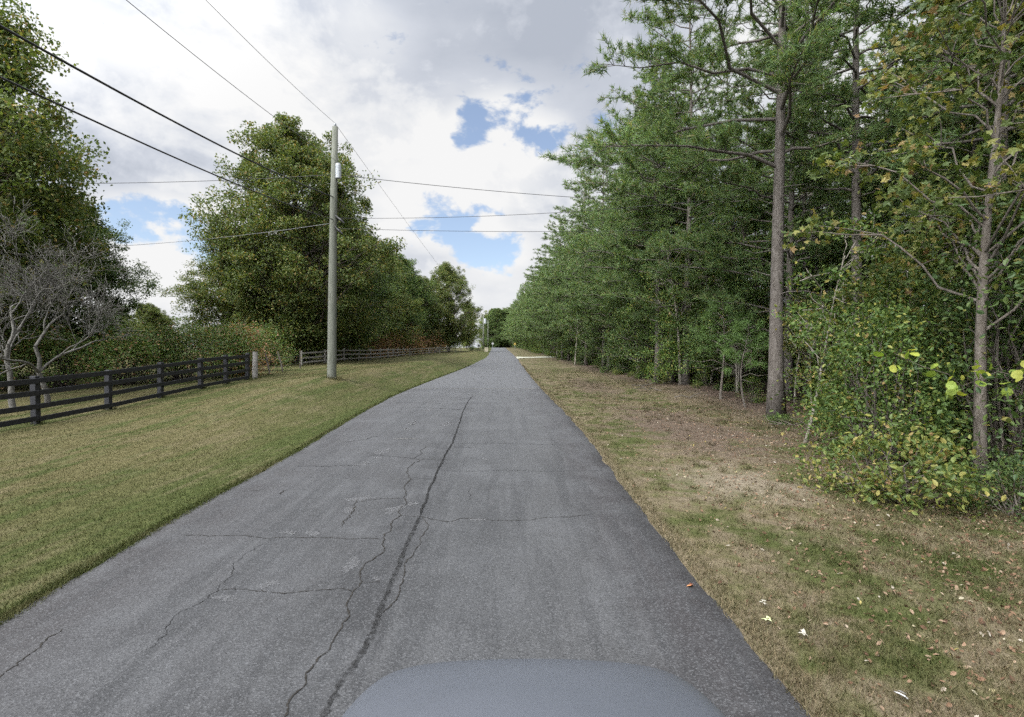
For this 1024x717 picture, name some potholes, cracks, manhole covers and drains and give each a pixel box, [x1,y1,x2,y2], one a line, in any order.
crack [150,436,589,717]
crack [0,628,63,677]
